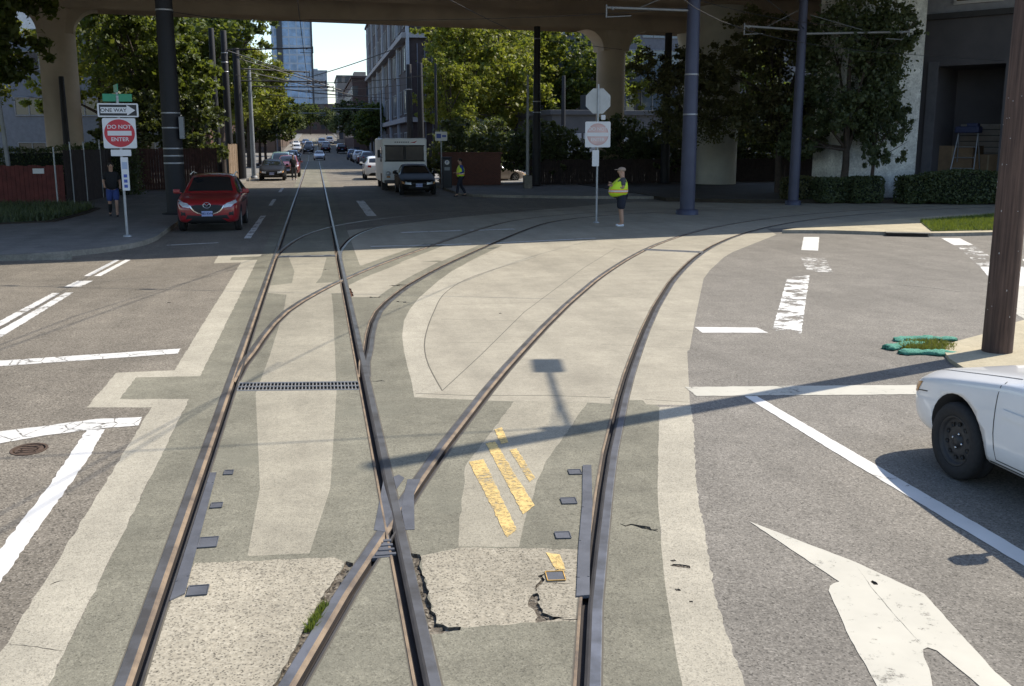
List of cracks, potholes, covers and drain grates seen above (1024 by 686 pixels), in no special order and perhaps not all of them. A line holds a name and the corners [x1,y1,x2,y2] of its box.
pothole [528,593,562,623]
drain grate [237,381,360,391]
crack [621,524,658,532]
manhole cover [10,443,48,456]
